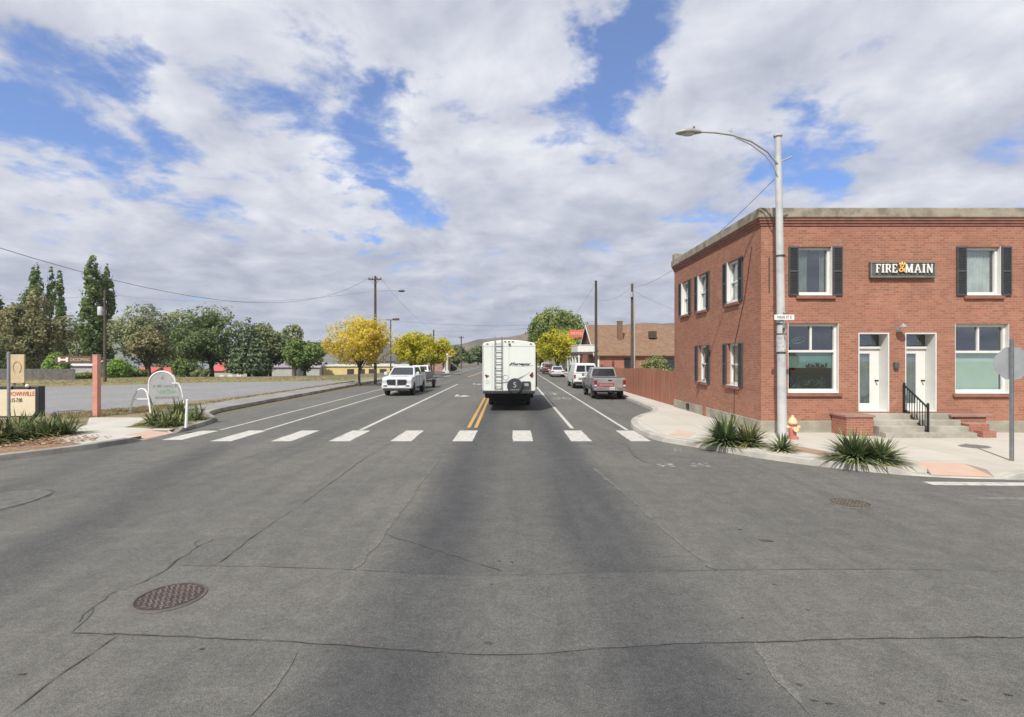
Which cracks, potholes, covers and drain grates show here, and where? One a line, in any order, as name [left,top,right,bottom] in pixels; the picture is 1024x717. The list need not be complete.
manhole cover [129,582,208,613]
crack [9,443,390,713]
manhole cover [828,498,873,509]
